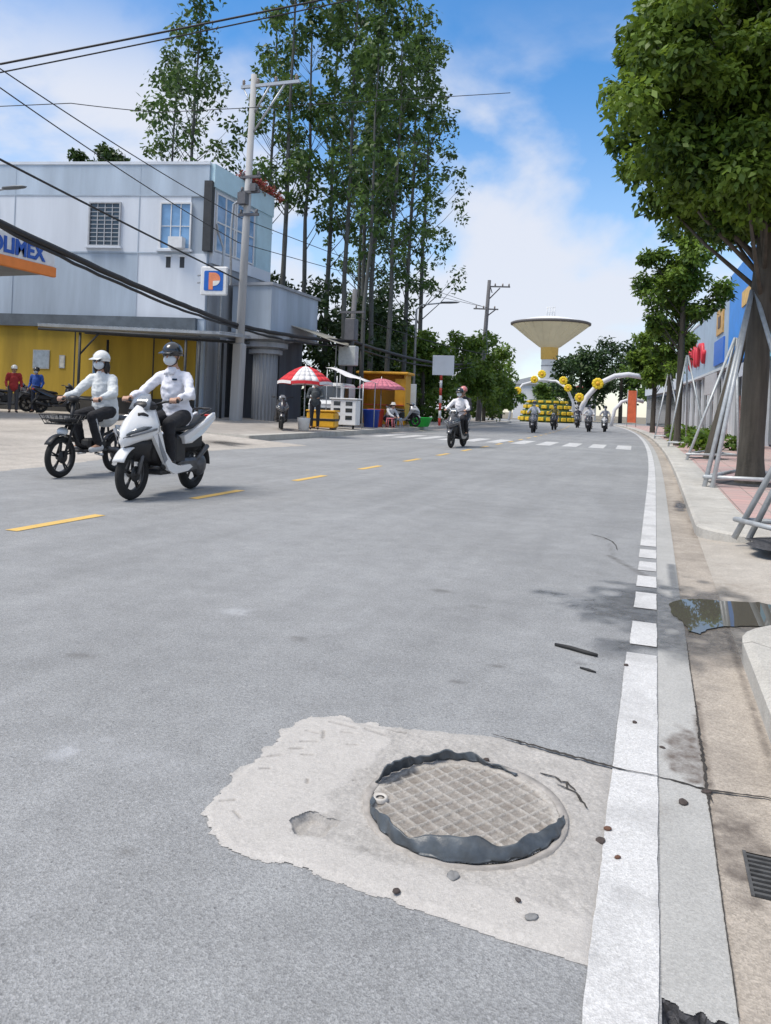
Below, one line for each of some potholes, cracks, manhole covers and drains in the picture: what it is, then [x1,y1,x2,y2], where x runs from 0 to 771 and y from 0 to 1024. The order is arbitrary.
pothole [289,811,341,837]
manhole cover [363,749,568,871]
pothole [662,998,728,1024]
drain grate [742,850,771,901]
